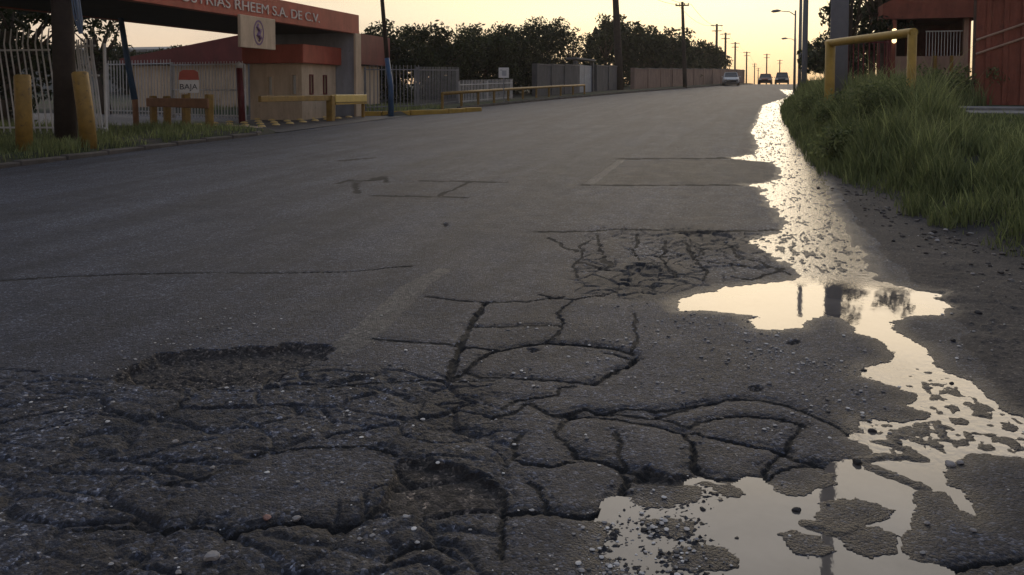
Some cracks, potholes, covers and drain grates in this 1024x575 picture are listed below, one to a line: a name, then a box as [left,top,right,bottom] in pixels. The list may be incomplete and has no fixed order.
crack [157,445,398,487]
pothole [114,342,336,392]
crack [949,558,1024,575]
crack [71,508,381,542]
crack [322,233,850,561]
